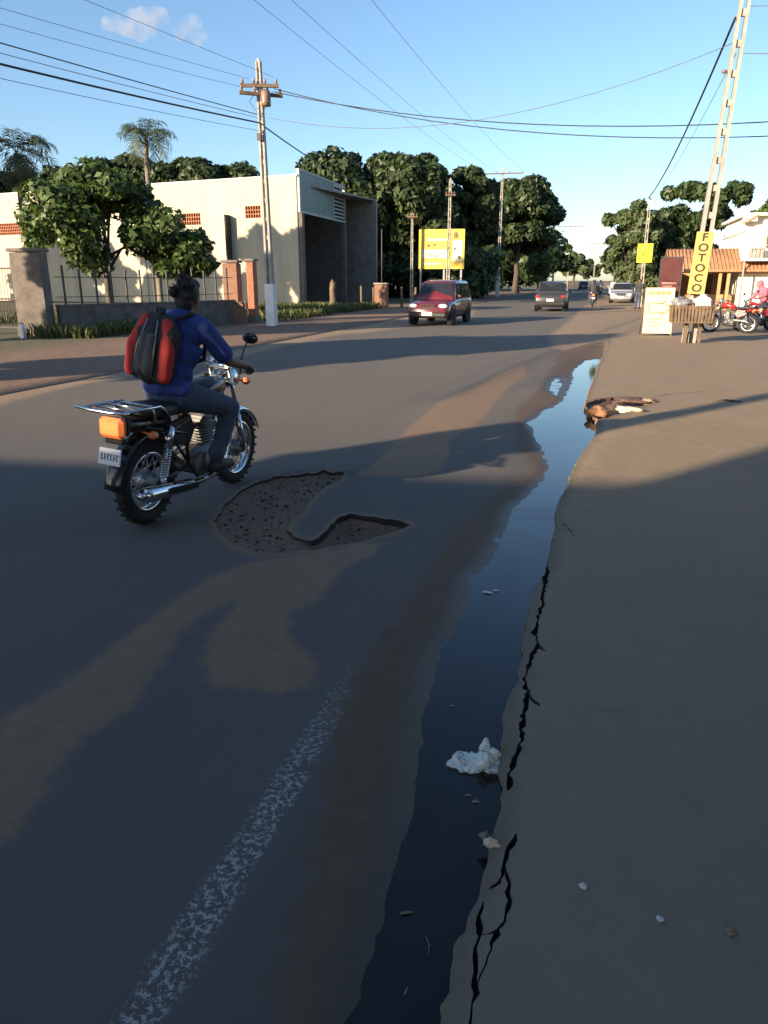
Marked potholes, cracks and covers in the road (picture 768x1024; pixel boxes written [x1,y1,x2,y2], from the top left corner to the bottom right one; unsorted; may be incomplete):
crack [468,834,517,1024]
pothole [214,470,410,554]
crack [507,566,550,790]
